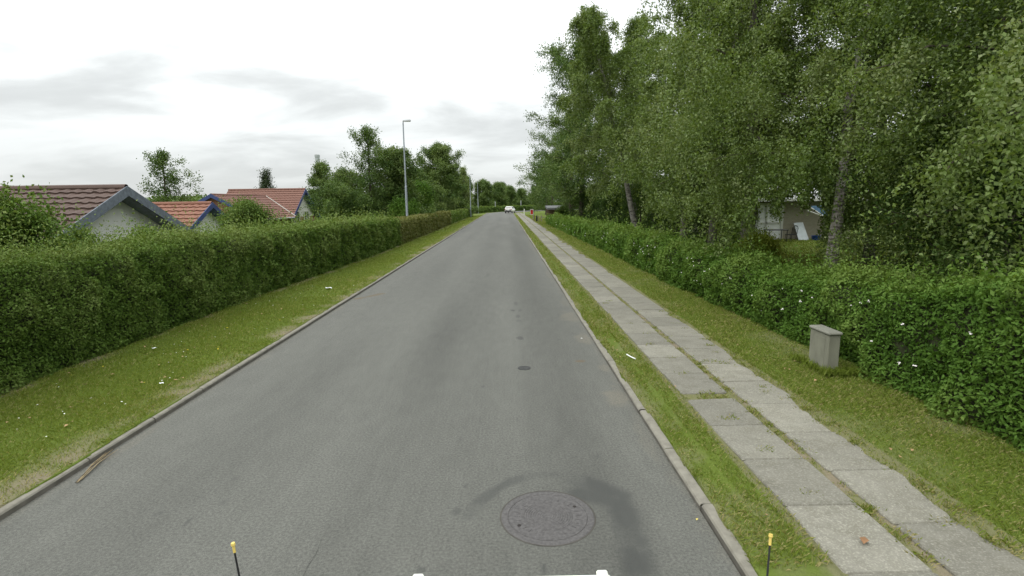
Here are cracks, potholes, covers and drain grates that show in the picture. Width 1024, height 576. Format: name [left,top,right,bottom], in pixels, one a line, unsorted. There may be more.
manhole cover [500,491,596,547]
